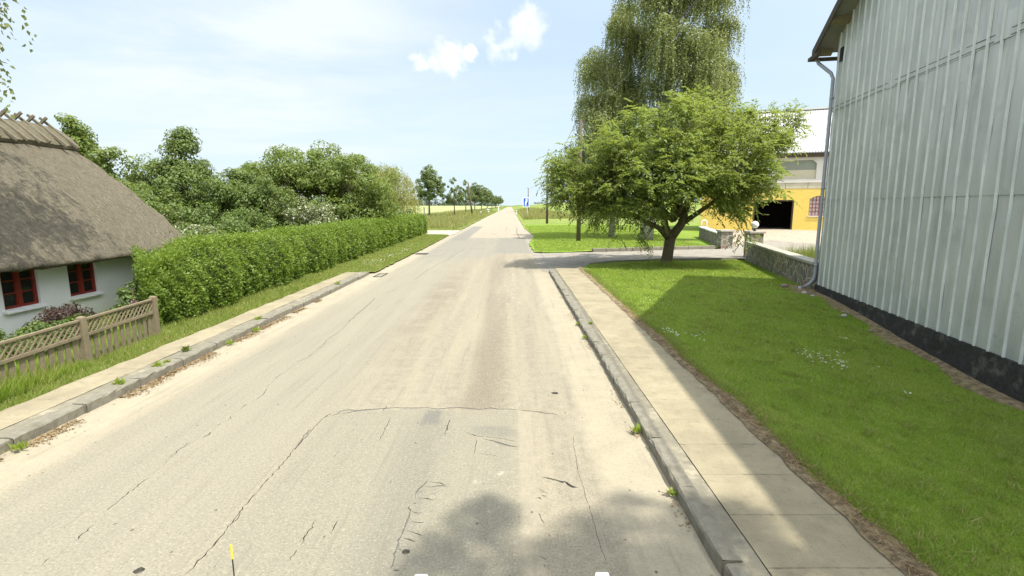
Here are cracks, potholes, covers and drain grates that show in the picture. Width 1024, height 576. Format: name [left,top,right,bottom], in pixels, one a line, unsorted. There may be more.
crack [538,437,606,560]
crack [43,227,520,564]
crack [331,406,556,456]
